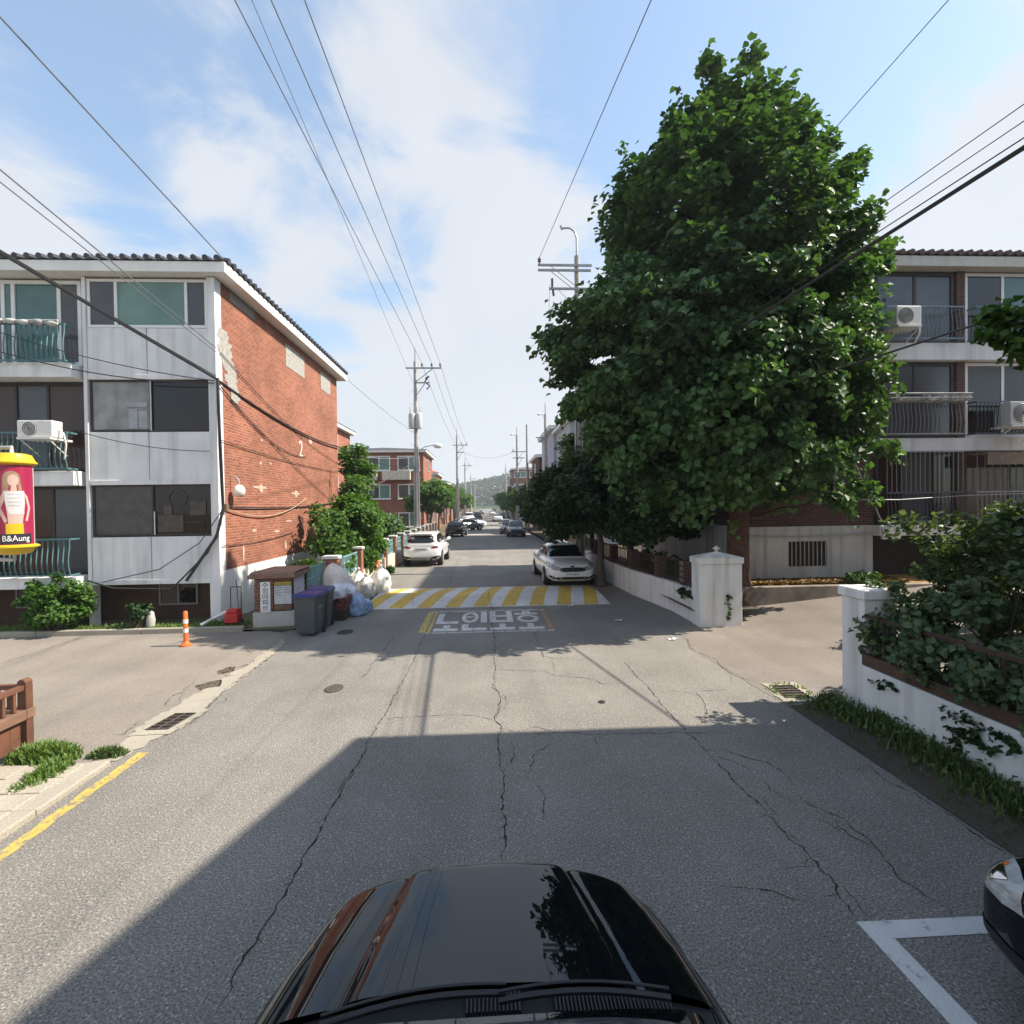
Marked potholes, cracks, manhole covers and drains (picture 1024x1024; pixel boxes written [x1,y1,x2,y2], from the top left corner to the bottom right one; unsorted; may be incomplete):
crack [211,594,954,1021]
crack [837,765,1006,853]
drain grate [762,682,816,703]
crack [120,641,294,737]
drain grate [129,708,209,736]
manhole cover [324,684,343,693]
